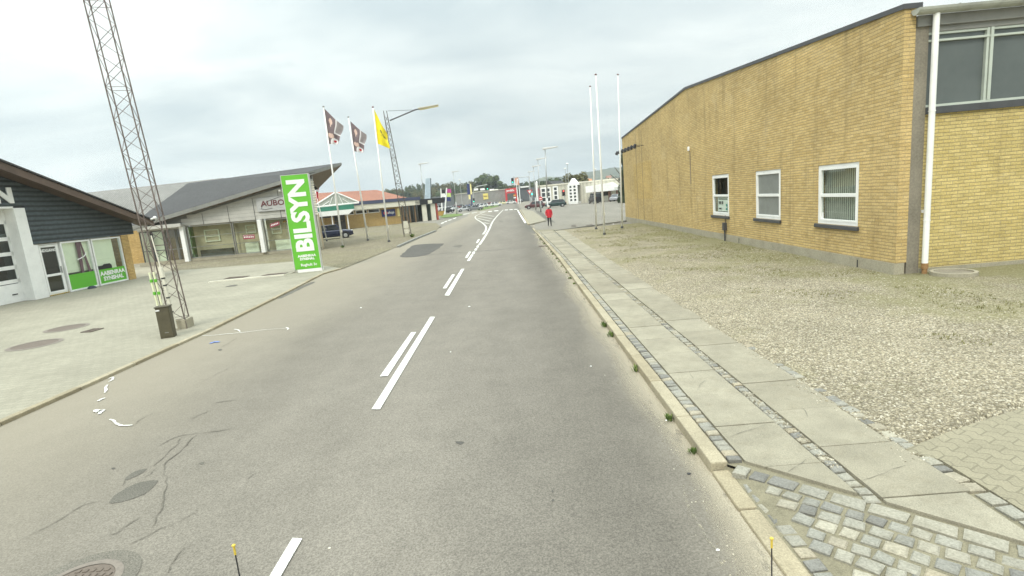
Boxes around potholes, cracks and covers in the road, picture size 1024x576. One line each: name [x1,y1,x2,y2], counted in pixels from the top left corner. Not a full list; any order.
manhole cover [44,550,142,576]
manhole cover [4,338,64,351]
manhole cover [43,323,90,333]
crack [110,400,231,548]
